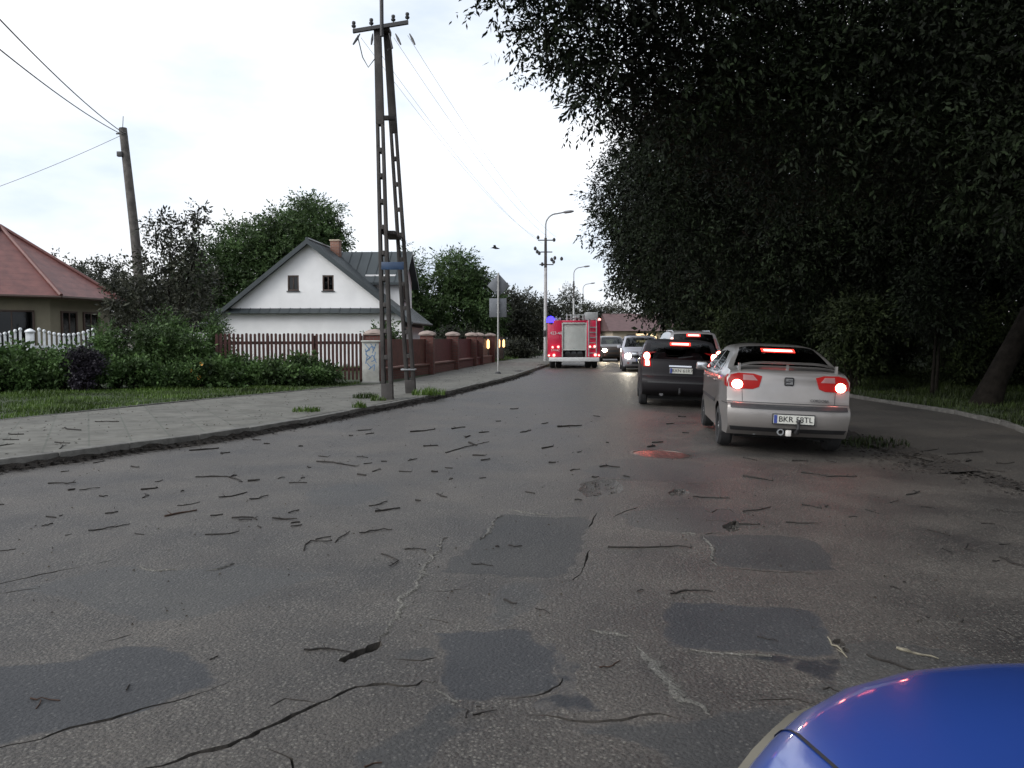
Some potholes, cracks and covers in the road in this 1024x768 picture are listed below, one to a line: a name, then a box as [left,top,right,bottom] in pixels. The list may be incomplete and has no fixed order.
crack [552,550,590,582]
manhole cover [630,450,693,459]
crack [0,680,436,768]
pothole [578,479,624,497]
pothole [722,520,741,532]
crack [0,567,79,594]
